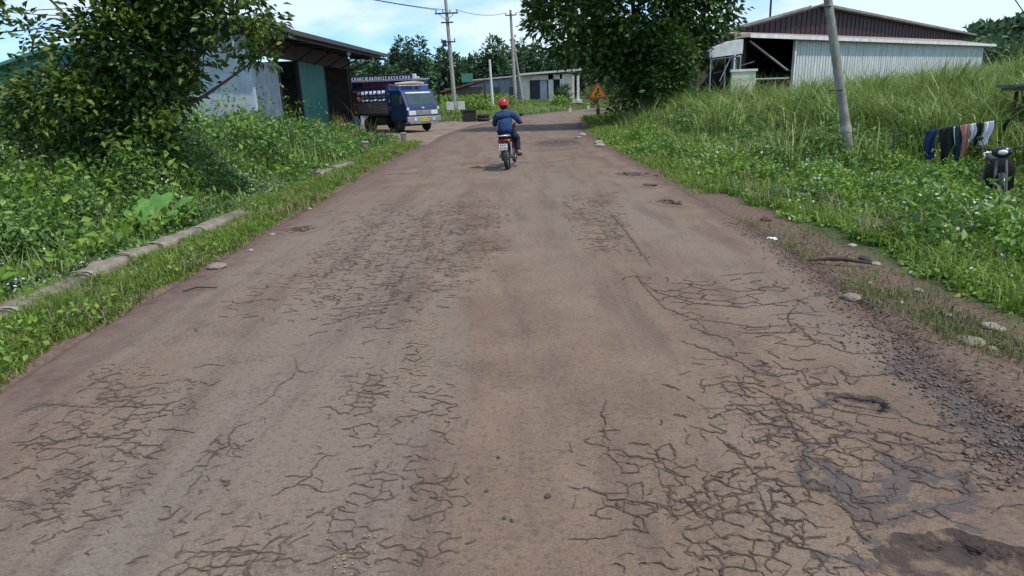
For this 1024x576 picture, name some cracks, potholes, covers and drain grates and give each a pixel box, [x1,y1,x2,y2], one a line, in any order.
crack [555,192,1024,576]
pothole [851,520,1024,576]
pothole [647,198,692,207]
pothole [811,388,911,418]
crack [0,343,477,576]
